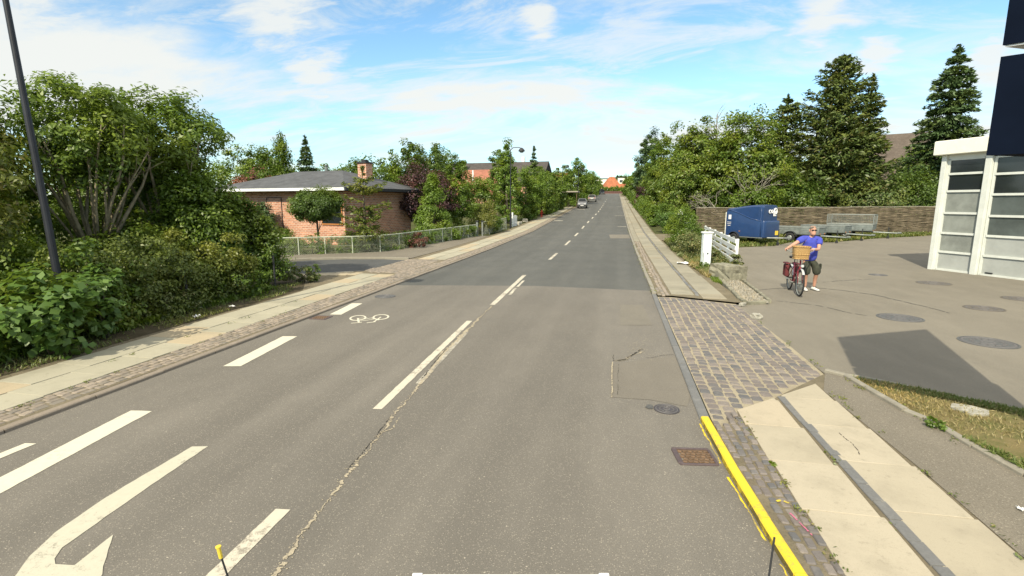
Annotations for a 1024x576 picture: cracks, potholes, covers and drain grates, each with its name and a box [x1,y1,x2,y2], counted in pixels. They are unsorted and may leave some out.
manhole cover [876,313,925,322]
drain grate [671,447,719,466]
manhole cover [957,336,1022,349]
manhole cover [654,404,680,415]
crack [271,306,491,576]
